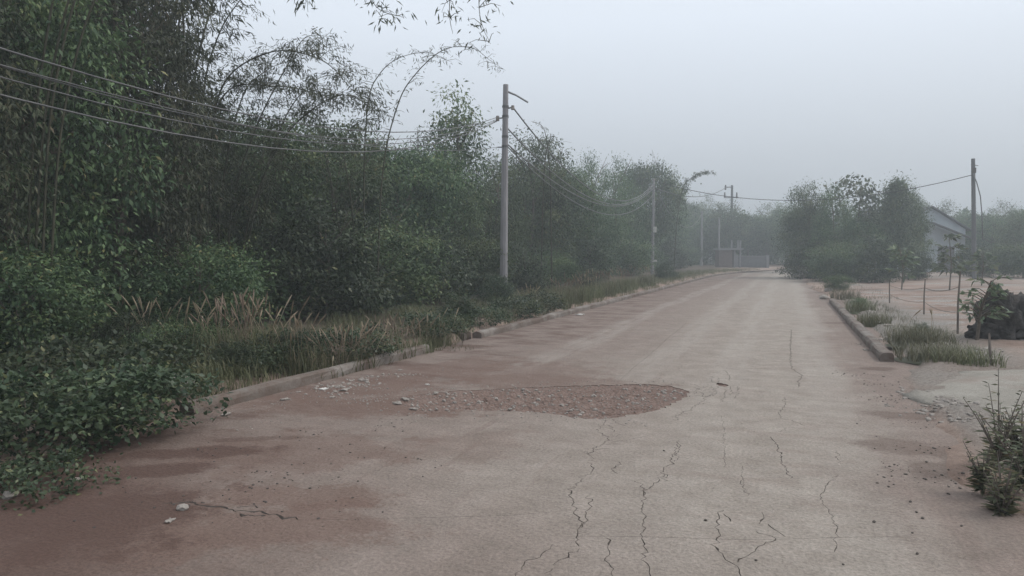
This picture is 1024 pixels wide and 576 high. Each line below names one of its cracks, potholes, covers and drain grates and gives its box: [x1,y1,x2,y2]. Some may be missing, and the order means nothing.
crack [165,501,298,520]
crack [675,370,740,420]
crack [515,419,644,576]
crack [714,331,805,576]
pothole [398,384,689,419]
crack [820,451,840,552]
crack [634,441,681,576]
